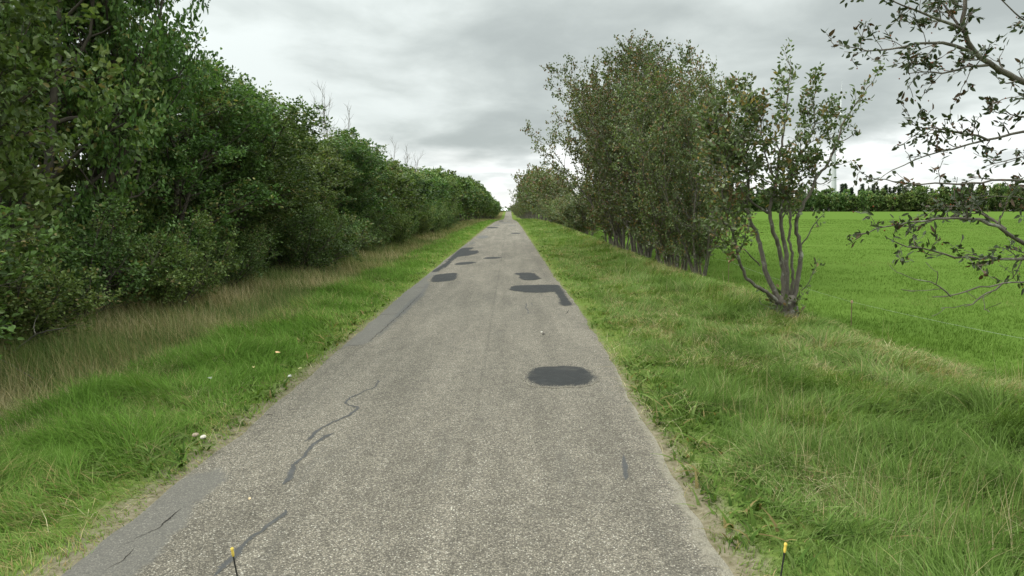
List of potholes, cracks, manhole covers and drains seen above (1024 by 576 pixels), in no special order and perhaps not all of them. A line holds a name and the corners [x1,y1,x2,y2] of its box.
crack [112,508,182,566]
